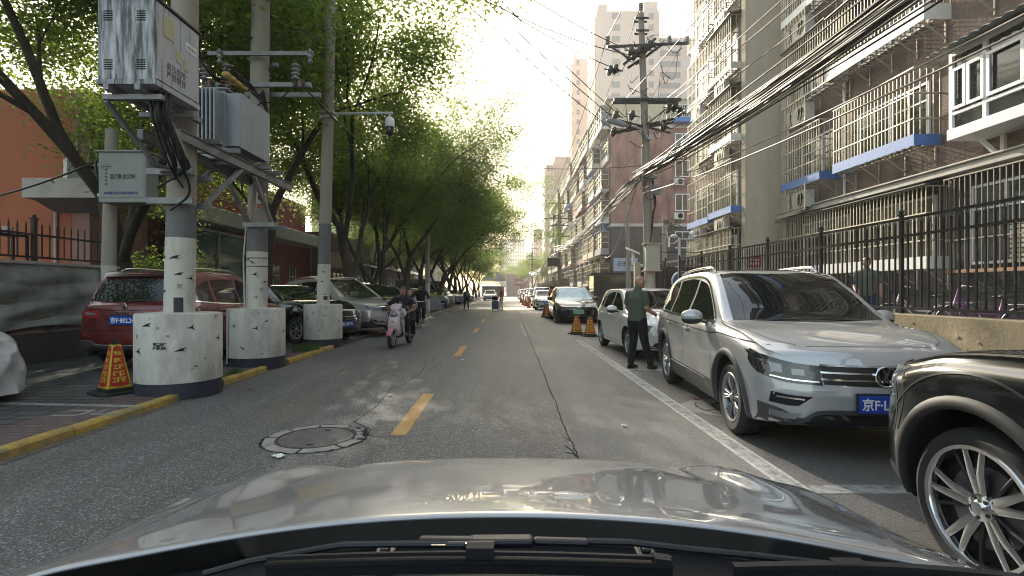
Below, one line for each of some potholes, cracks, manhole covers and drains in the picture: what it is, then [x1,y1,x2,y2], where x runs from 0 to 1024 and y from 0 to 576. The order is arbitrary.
manhole cover [258,424,368,454]
crack [352,356,440,438]
